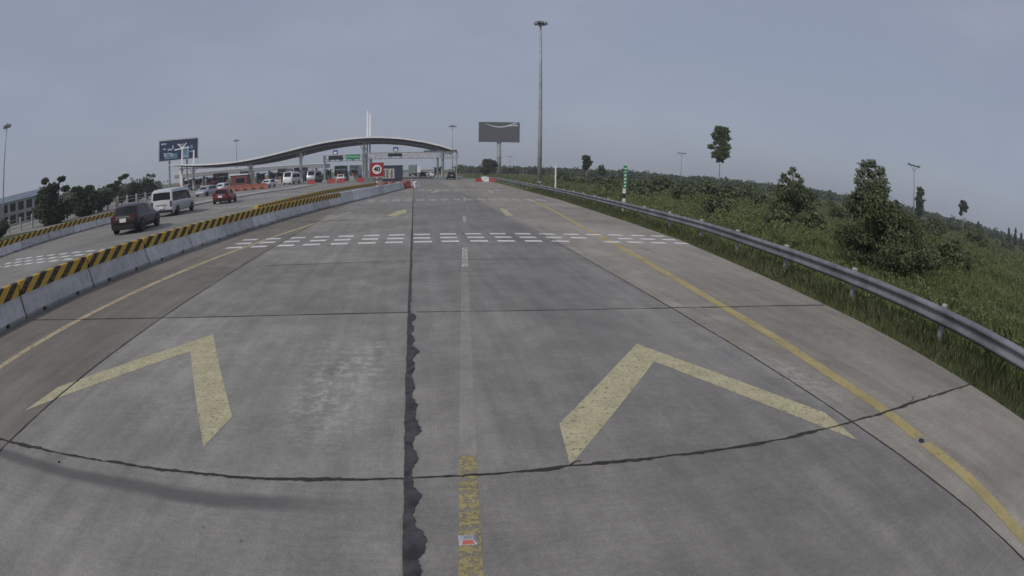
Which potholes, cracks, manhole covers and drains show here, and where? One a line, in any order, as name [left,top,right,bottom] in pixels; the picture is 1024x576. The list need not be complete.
crack [0,384,971,482]
